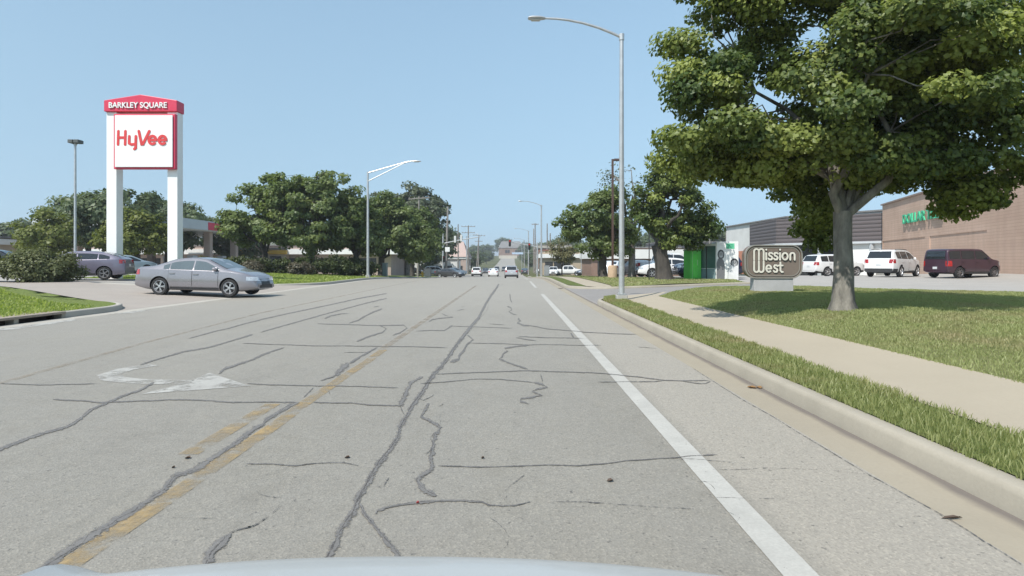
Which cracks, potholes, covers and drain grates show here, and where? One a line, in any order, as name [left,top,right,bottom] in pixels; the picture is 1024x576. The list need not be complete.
crack [1,383,403,406]
crack [202,494,279,564]
crack [375,454,865,549]
crack [246,298,709,404]
